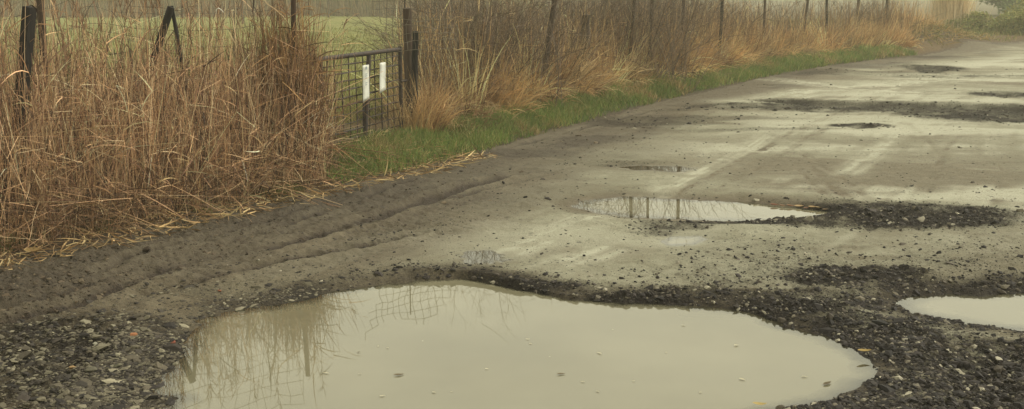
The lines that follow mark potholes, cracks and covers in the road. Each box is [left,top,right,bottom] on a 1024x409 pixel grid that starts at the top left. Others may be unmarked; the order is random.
pothole [99,265,924,409]
pothole [613,164,702,173]
pothole [547,189,861,223]
pothole [742,97,1024,123]
pothole [844,122,886,130]
